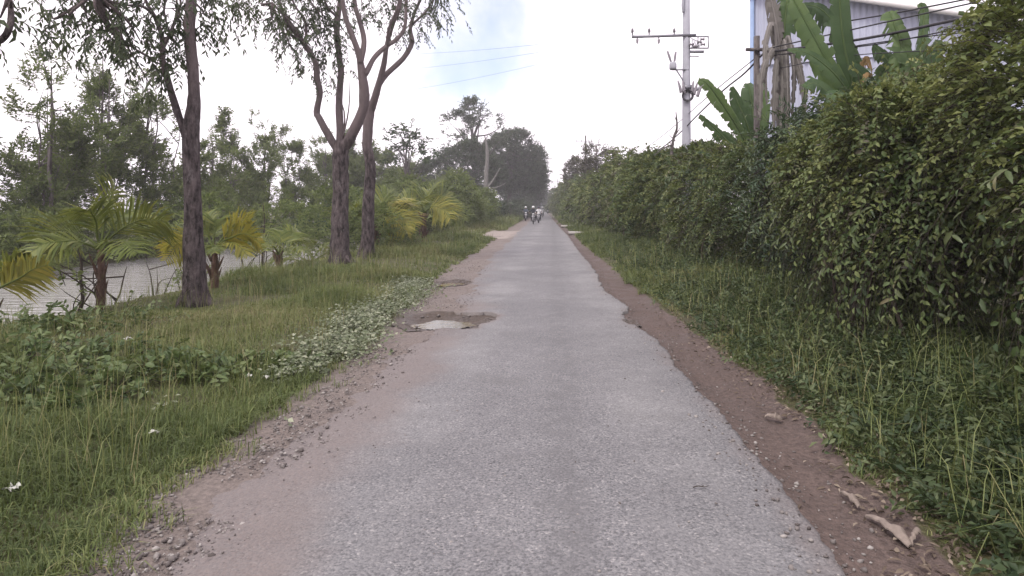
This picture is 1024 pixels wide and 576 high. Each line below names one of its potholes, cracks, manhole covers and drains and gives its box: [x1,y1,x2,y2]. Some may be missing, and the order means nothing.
pothole [429,279,473,288]
pothole [387,311,496,332]
